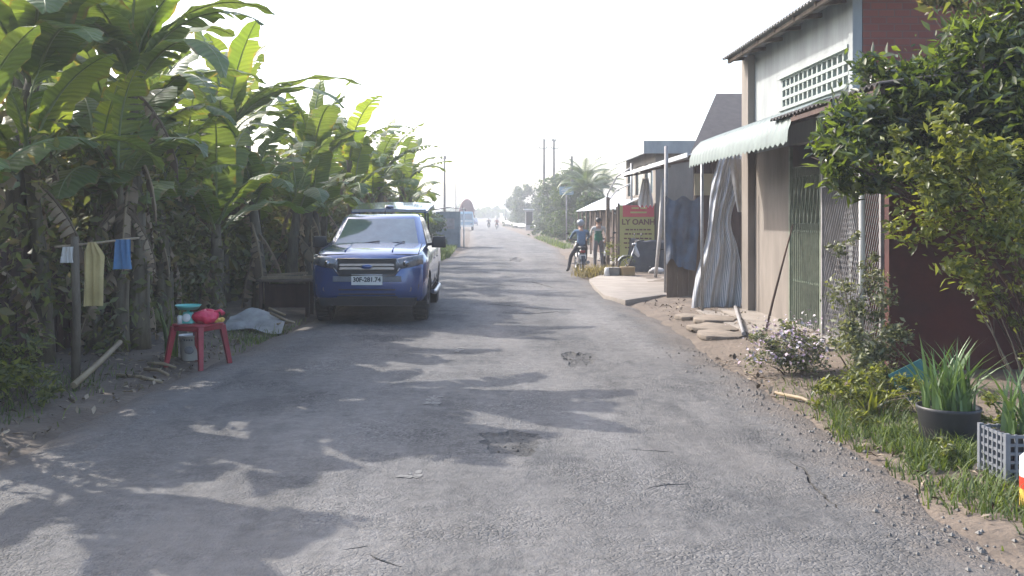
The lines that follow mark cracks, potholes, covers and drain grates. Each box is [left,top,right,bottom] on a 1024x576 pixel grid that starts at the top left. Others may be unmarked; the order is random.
pothole [561,351,596,367]
crack [344,546,402,567]
pothole [479,430,543,457]
crack [786,459,839,509]
